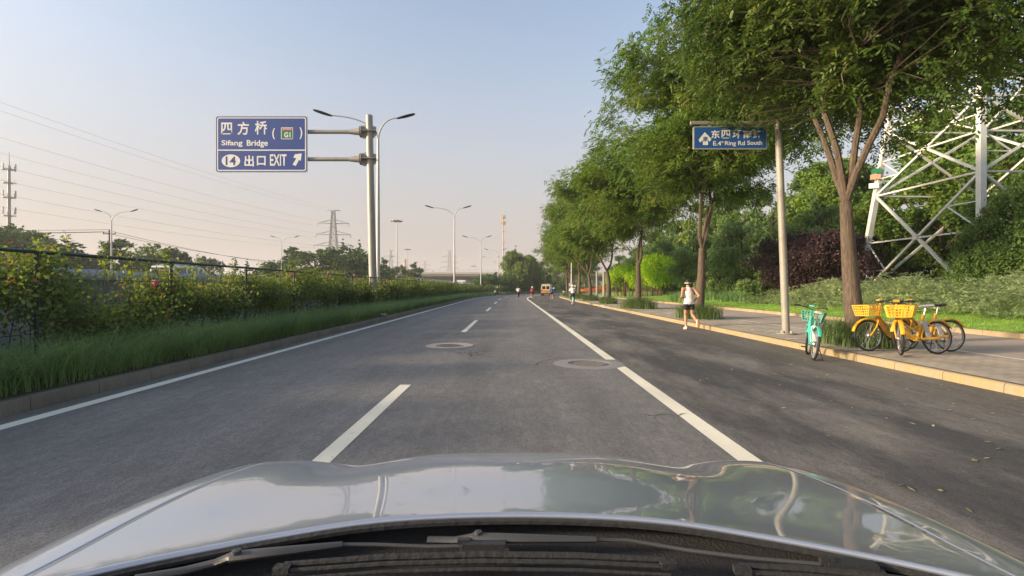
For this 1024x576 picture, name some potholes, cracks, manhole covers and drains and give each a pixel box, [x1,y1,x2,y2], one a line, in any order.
manhole cover [553,359,625,369]
